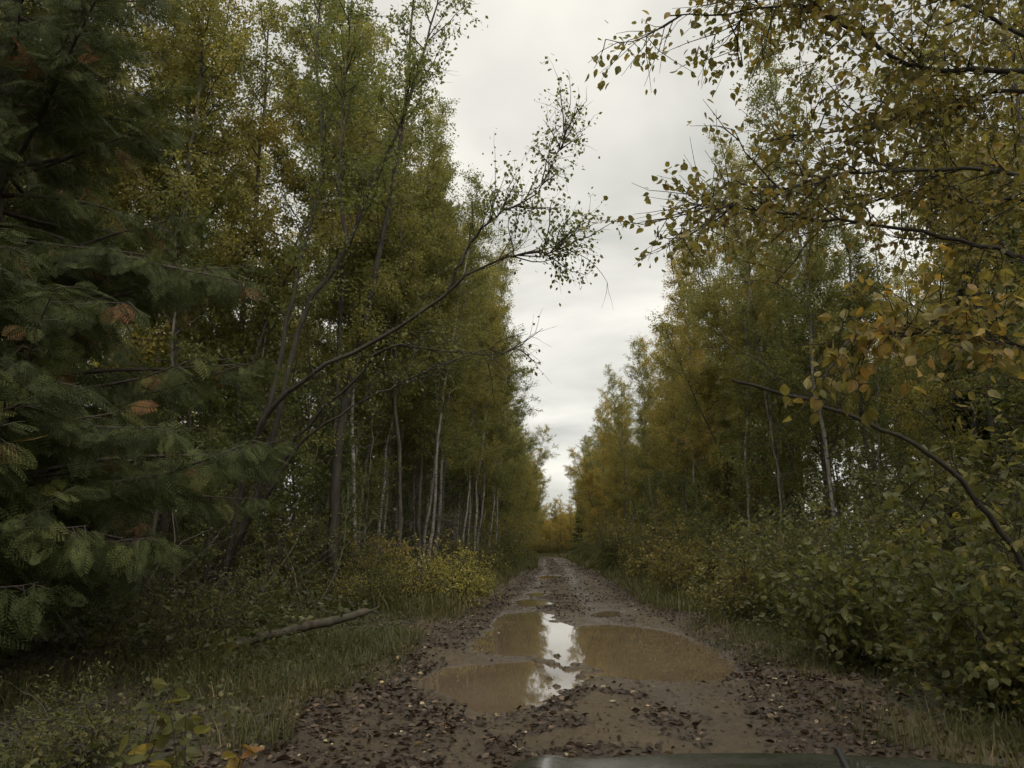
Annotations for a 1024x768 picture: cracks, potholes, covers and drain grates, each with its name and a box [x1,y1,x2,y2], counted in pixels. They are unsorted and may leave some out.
pothole [411,610,745,715]
pothole [509,598,567,607]
